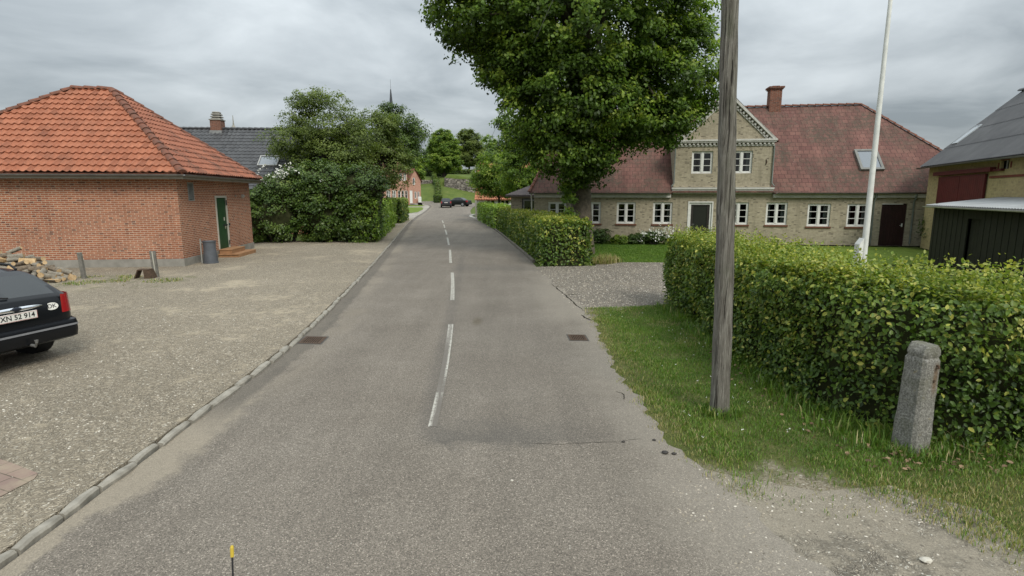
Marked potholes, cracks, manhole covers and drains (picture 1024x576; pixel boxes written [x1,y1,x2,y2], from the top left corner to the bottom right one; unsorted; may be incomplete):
drain grate [297,336,330,344]
